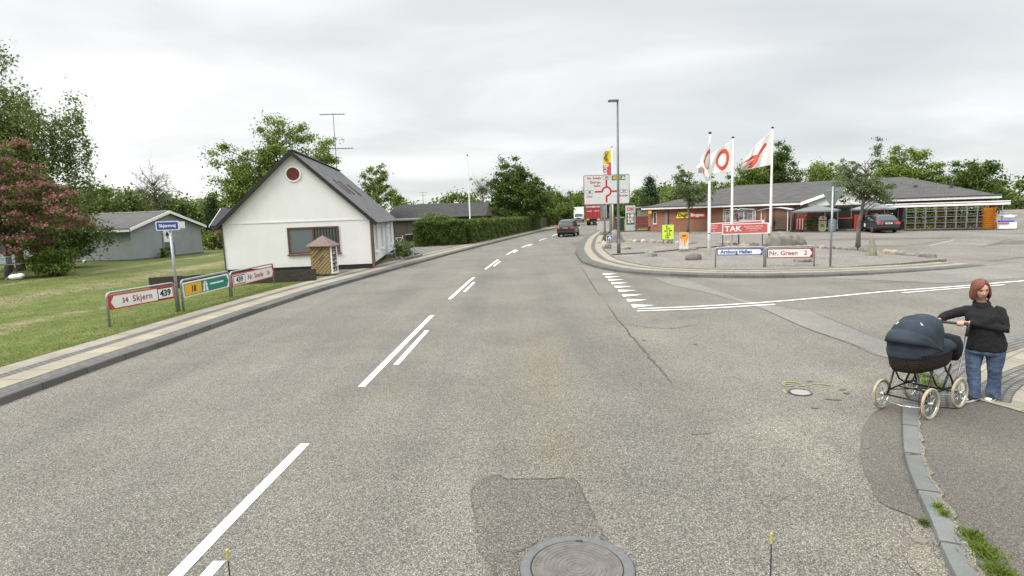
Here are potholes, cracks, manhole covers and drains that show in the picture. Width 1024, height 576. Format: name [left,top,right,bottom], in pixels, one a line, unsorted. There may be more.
manhole cover [787,388,812,396]
manhole cover [519,536,636,576]
